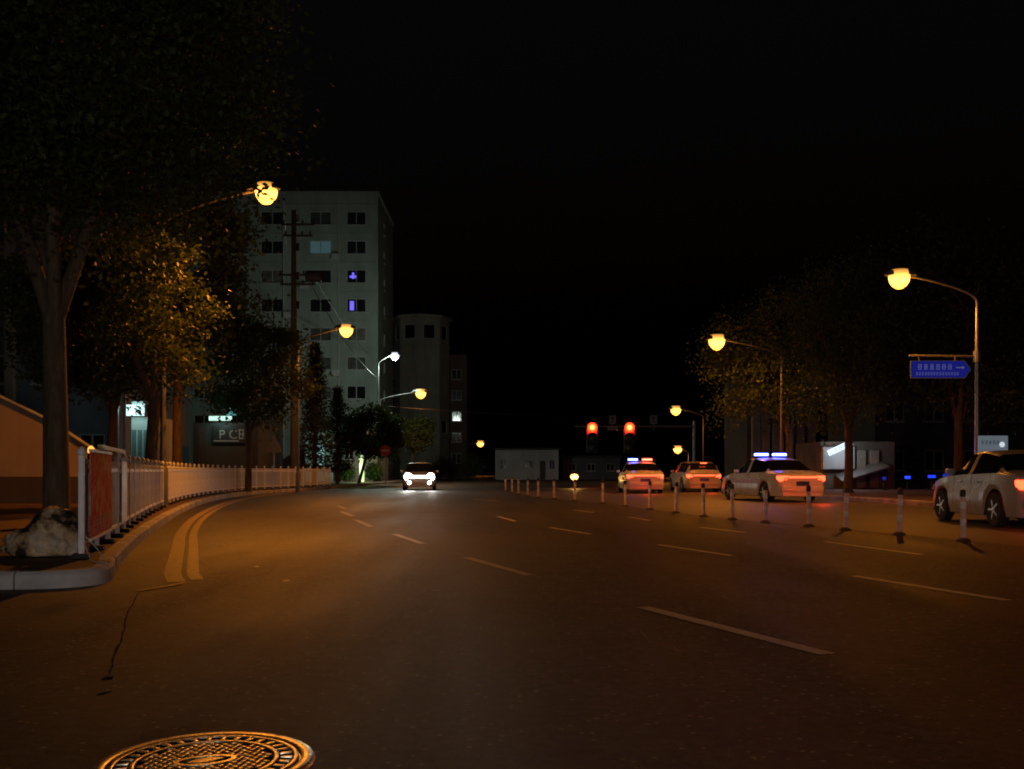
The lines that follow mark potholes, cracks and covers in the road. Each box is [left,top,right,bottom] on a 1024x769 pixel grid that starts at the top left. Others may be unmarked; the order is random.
crack [97,593,139,696]
manhole cover [91,732,316,769]
